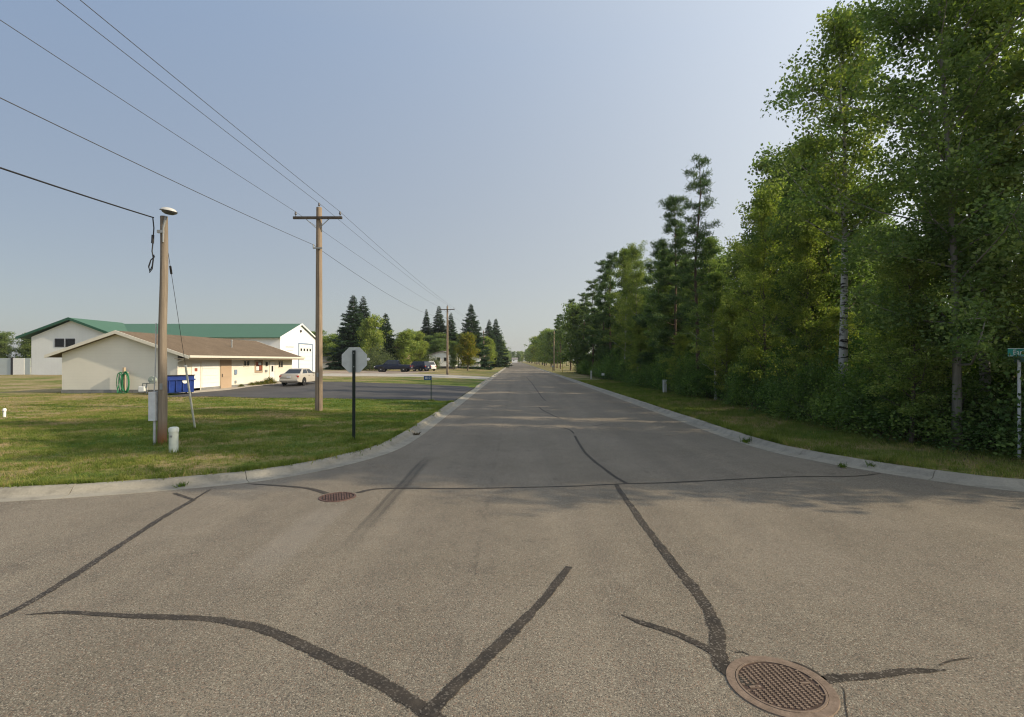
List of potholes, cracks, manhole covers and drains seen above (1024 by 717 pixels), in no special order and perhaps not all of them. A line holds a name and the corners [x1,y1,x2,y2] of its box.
manhole cover [318,492,356,502]
manhole cover [726,656,840,717]
